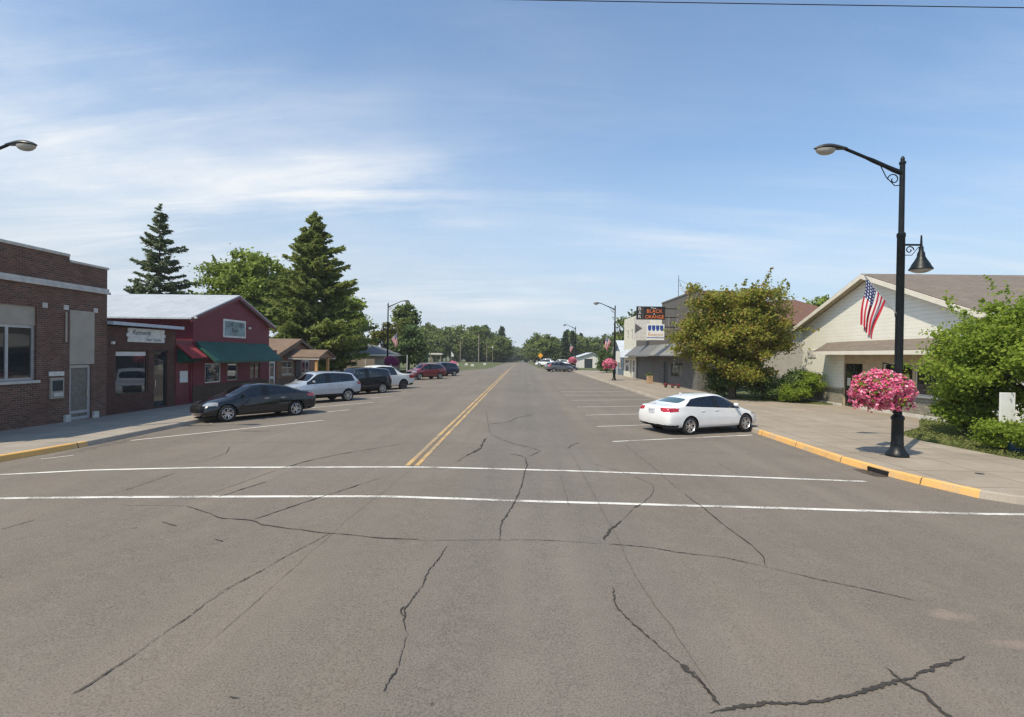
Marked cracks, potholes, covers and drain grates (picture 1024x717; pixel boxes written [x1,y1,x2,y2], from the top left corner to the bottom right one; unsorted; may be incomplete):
crack [70,412,917,695]
drain grate [854,466,889,477]
